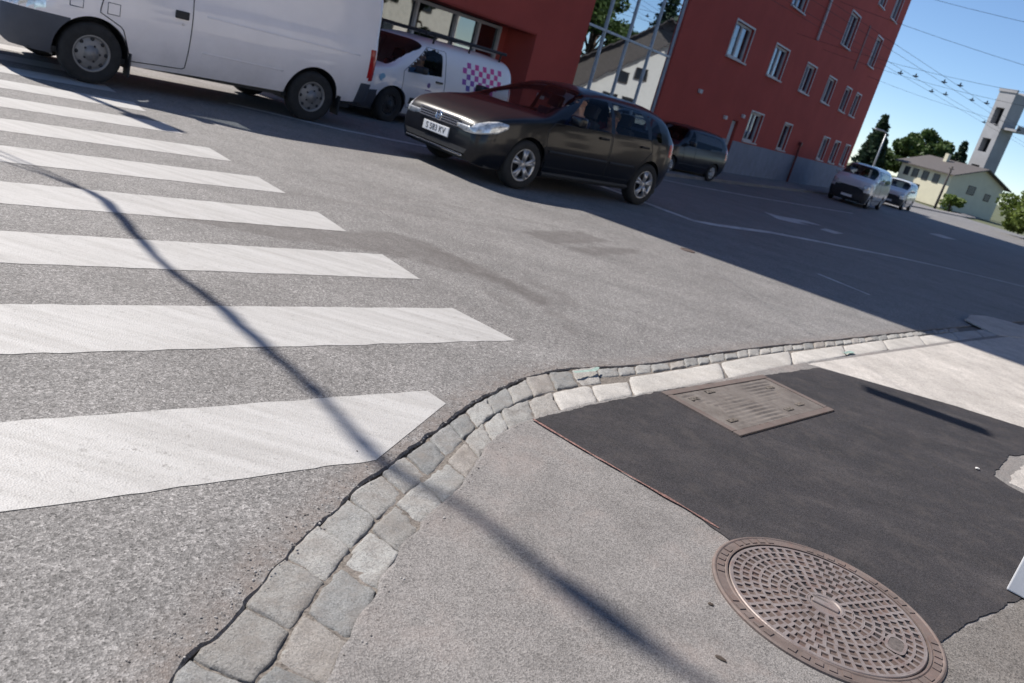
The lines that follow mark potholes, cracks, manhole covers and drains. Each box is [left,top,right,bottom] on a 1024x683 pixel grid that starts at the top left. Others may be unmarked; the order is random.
manhole cover [661,375,834,437]
manhole cover [712,537,947,683]
